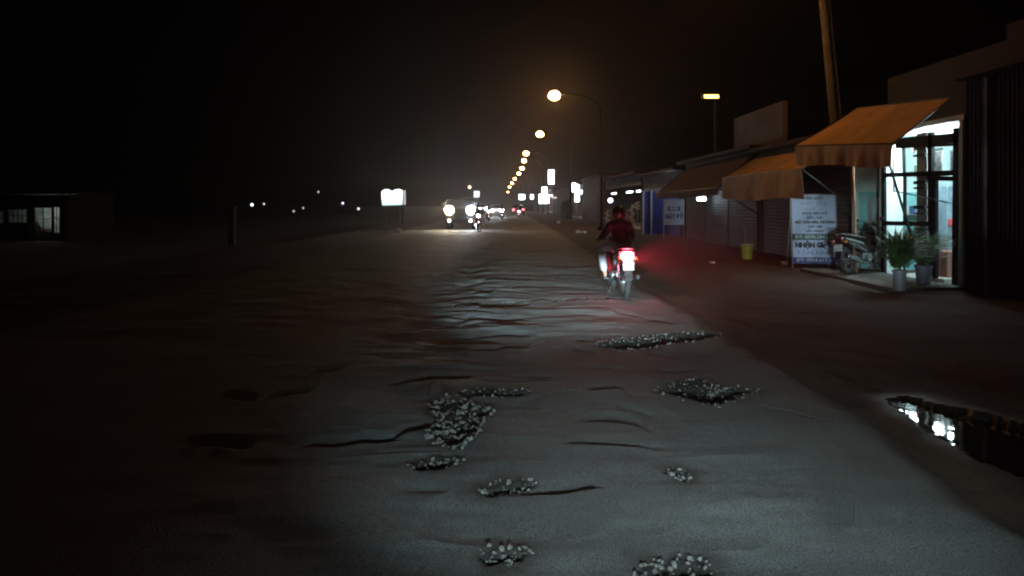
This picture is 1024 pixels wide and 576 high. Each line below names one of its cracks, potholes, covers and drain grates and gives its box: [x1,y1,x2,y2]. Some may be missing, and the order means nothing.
pothole [479,543,534,566]
pothole [406,454,466,471]
pothole [591,331,727,352]
pothole [654,377,760,408]
pothole [632,553,713,576]
pothole [424,392,496,450]
pothole [663,467,692,482]
pothole [453,387,533,399]
pothole [478,477,537,497]
